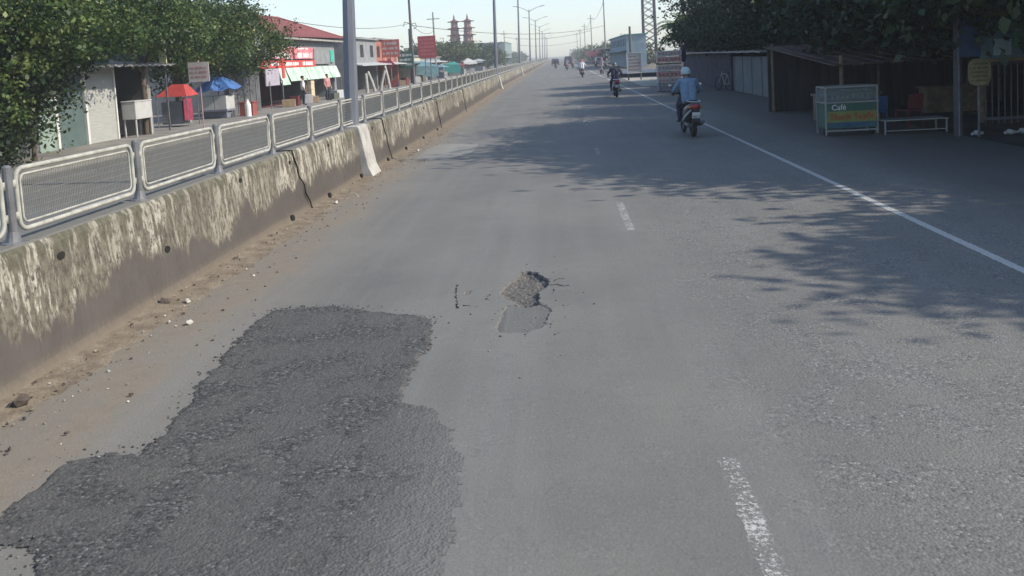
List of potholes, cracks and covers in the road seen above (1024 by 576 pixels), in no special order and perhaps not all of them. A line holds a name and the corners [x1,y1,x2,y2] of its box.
pothole [493,271,555,334]
